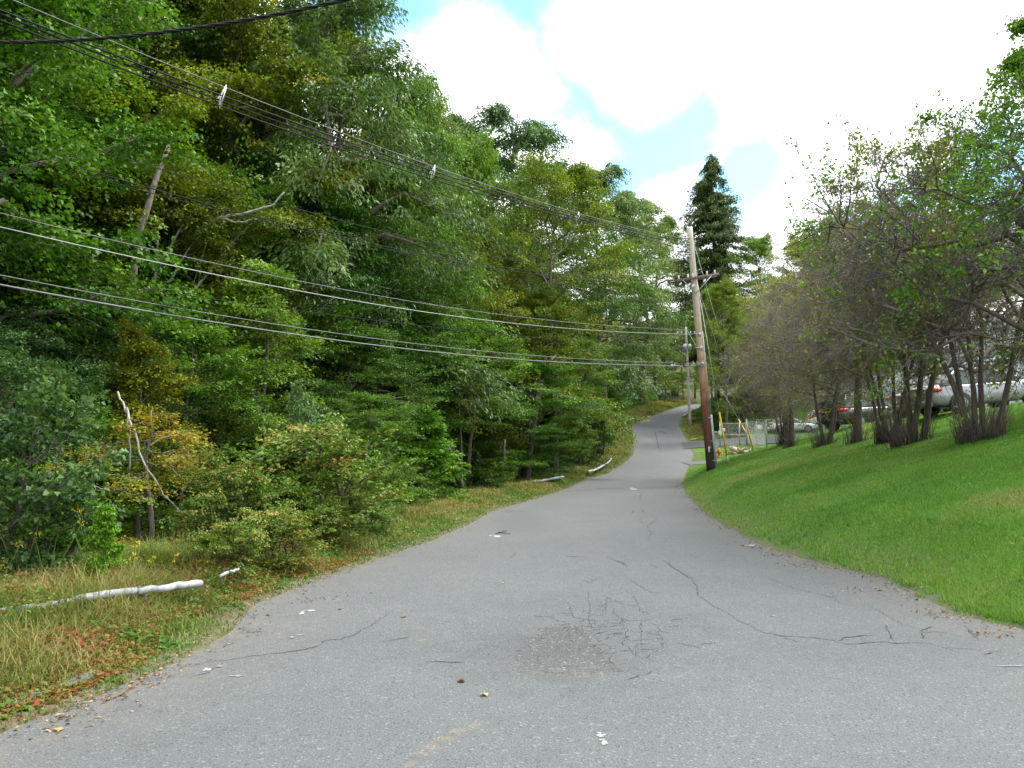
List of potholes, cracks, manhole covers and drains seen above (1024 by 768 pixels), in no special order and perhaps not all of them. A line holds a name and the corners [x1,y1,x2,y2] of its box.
crack [655,562,1008,654]
crack [507,580,718,679]
crack [192,614,406,677]
